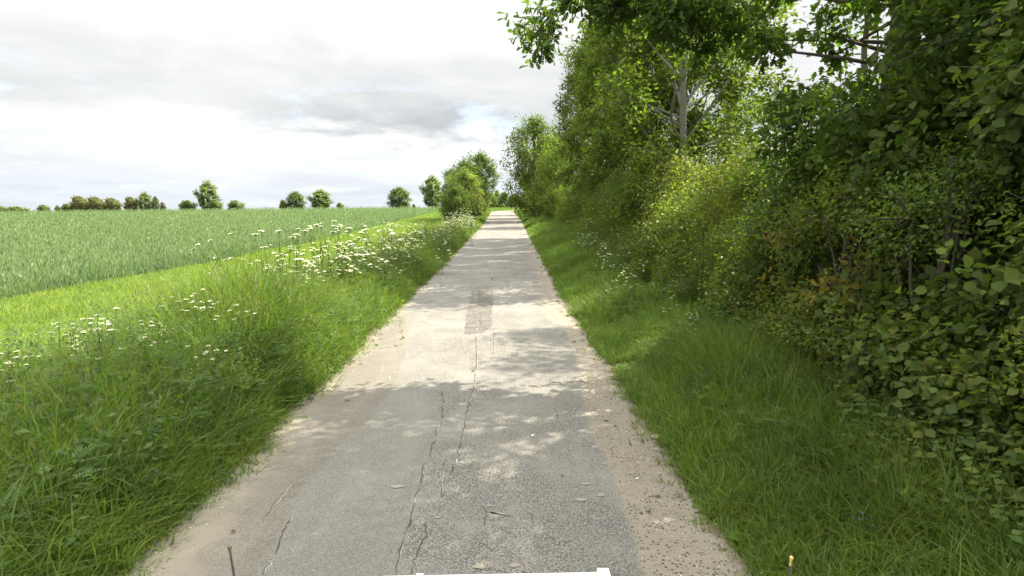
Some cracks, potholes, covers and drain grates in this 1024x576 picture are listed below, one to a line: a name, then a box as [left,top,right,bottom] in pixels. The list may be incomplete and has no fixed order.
crack [240,482,305,575]
crack [412,278,495,576]
